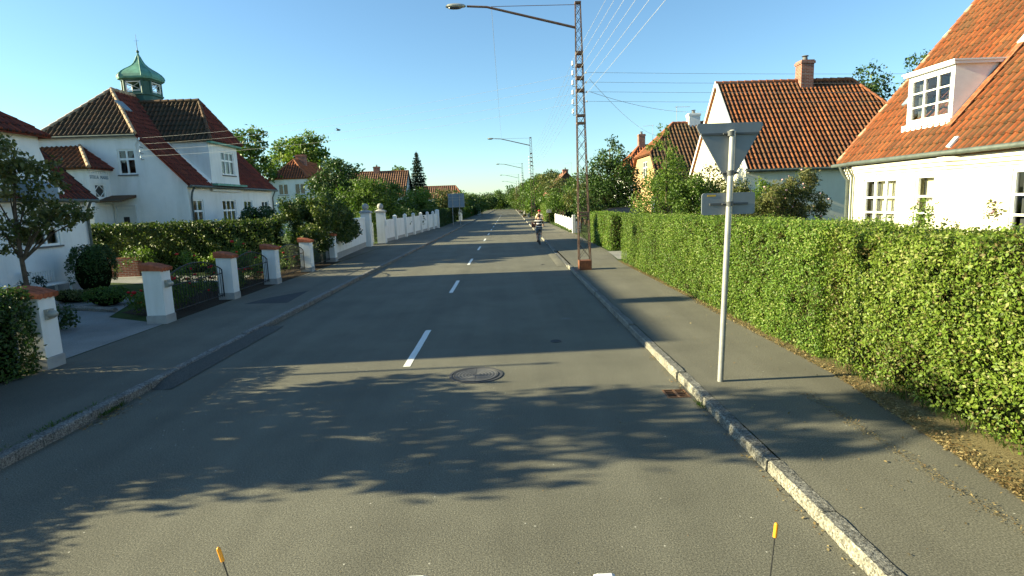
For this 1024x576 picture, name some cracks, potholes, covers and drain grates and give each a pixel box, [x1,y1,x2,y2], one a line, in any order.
drain grate [662,389,691,398]
manhole cover [449,367,503,384]
